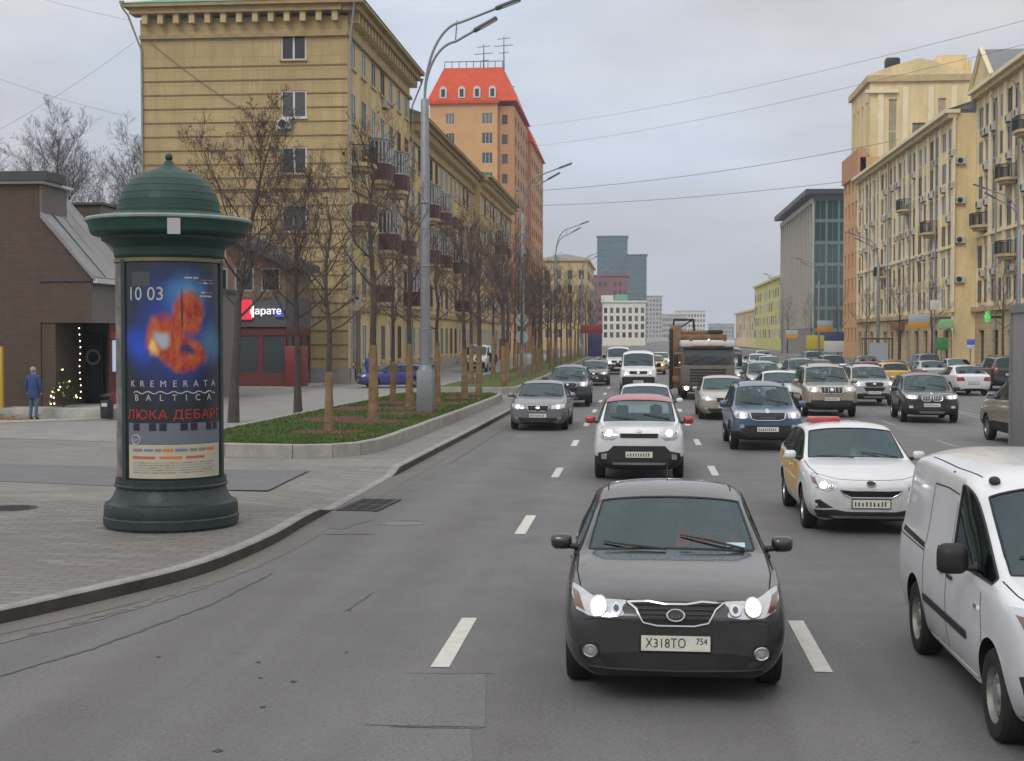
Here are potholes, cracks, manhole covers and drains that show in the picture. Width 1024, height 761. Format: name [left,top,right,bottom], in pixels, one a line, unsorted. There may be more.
drain grate [334,498,401,512]
